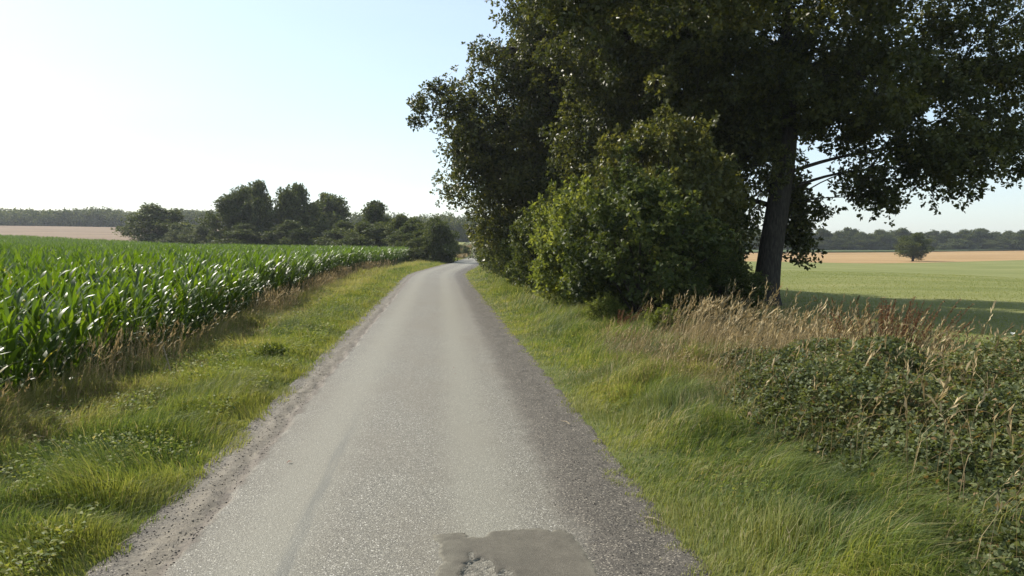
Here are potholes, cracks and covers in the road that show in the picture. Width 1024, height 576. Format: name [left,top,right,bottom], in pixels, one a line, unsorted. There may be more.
pothole [458,552,514,576]
